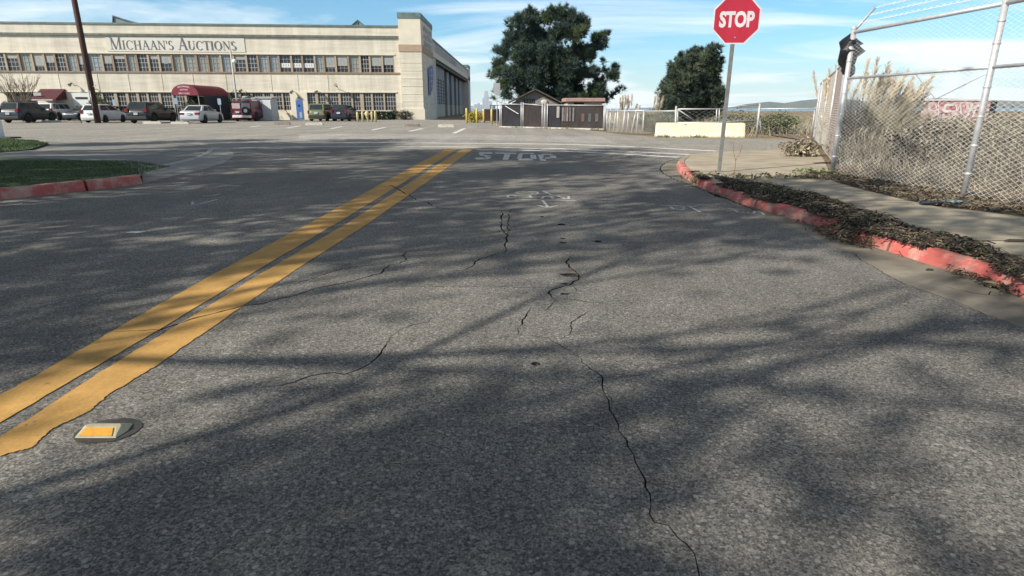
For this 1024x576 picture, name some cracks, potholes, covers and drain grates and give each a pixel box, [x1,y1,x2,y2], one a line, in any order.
crack [157,187,700,576]
